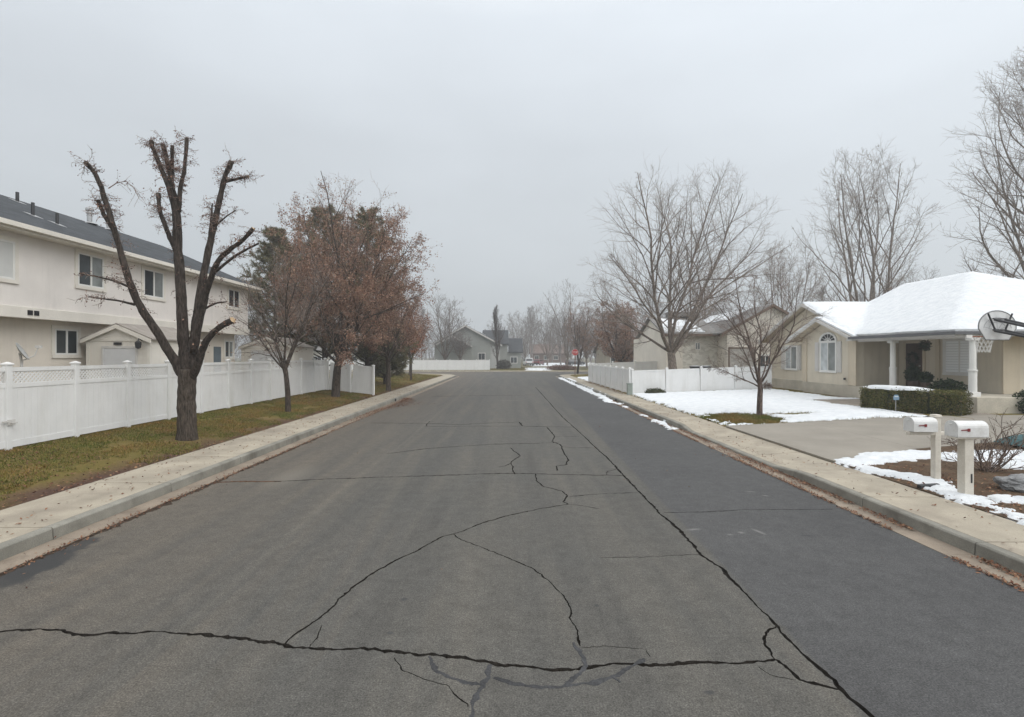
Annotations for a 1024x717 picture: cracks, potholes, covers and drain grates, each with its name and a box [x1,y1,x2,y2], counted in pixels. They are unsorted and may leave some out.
crack [0,389,875,717]
